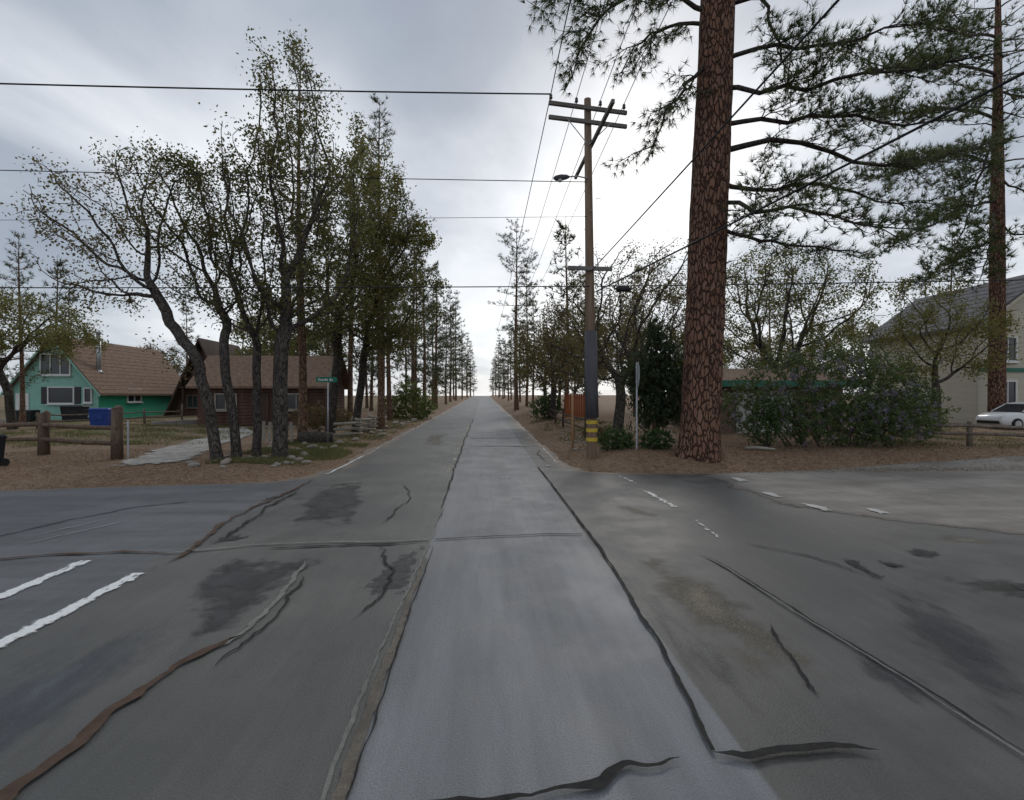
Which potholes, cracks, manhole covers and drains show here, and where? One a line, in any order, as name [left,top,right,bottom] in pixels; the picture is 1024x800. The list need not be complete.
crack [0,451,1024,800]
